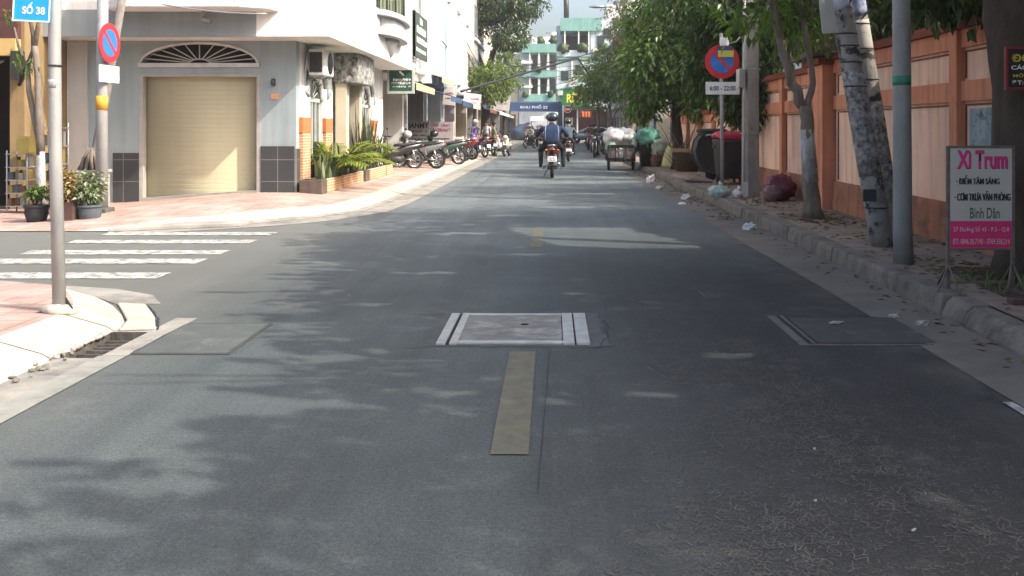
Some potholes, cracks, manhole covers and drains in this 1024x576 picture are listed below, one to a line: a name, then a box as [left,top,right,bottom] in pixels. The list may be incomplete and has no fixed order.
manhole cover [767,316,937,346]
drain grate [52,329,147,359]
manhole cover [429,311,611,348]
